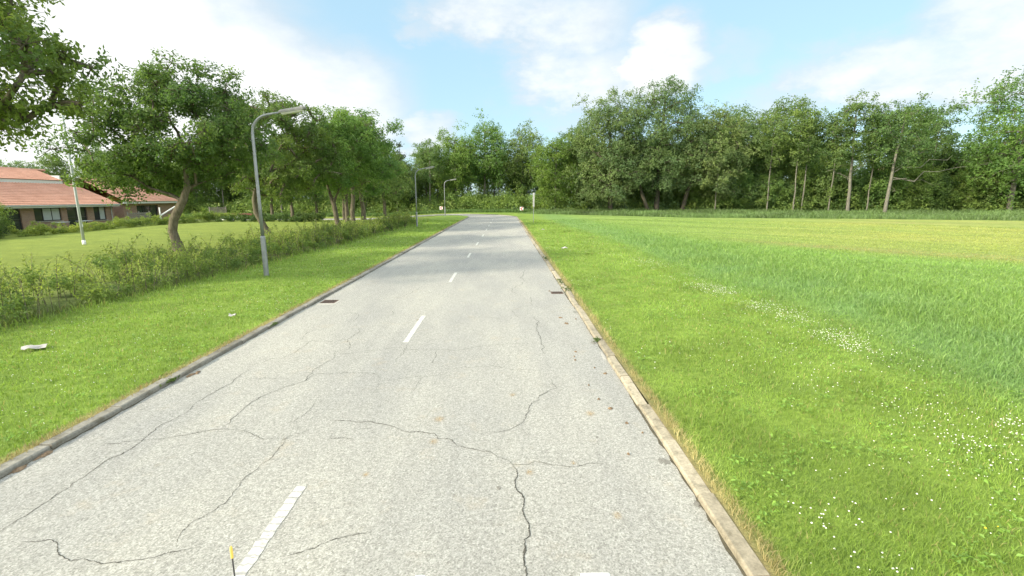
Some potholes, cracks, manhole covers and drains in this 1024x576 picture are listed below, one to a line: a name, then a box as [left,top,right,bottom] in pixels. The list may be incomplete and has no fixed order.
crack [2,272,555,564]
crack [513,461,602,576]
